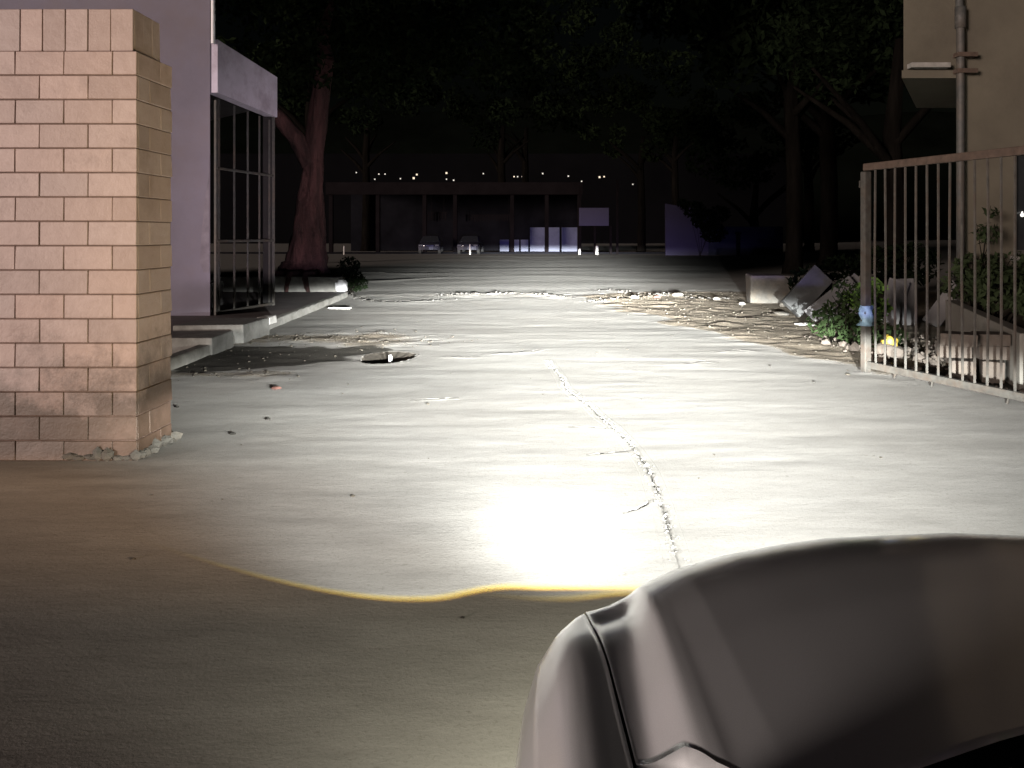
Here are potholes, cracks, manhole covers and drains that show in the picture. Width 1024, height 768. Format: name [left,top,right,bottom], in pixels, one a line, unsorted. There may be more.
crack [440,348,762,573]
pothole [350,350,423,366]
